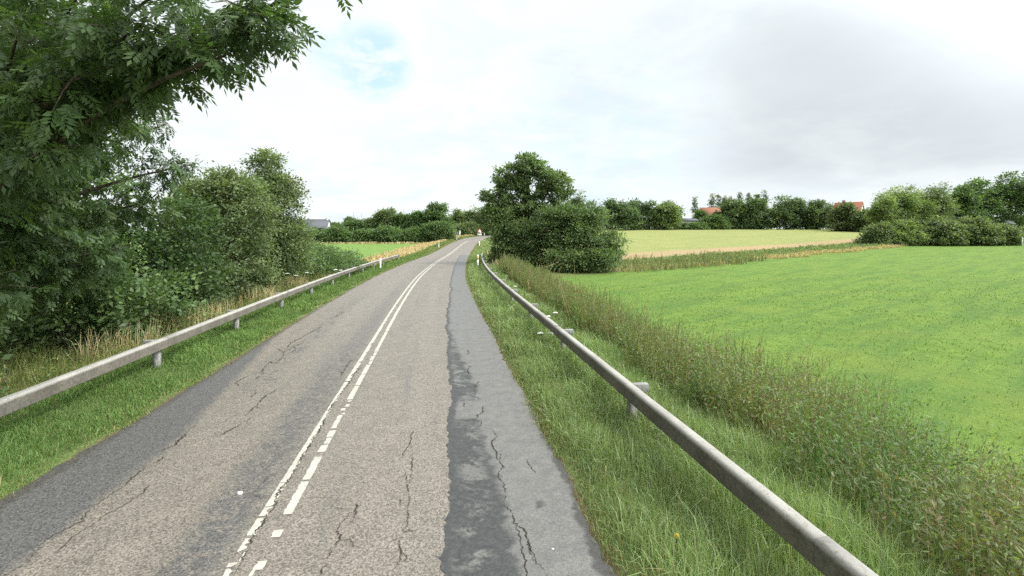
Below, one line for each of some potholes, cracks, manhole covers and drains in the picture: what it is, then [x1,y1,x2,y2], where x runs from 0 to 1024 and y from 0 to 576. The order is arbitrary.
crack [319,504,359,576]
crack [5,427,192,575]
crack [393,431,414,571]
crack [463,353,548,576]
crack [222,313,341,435]
